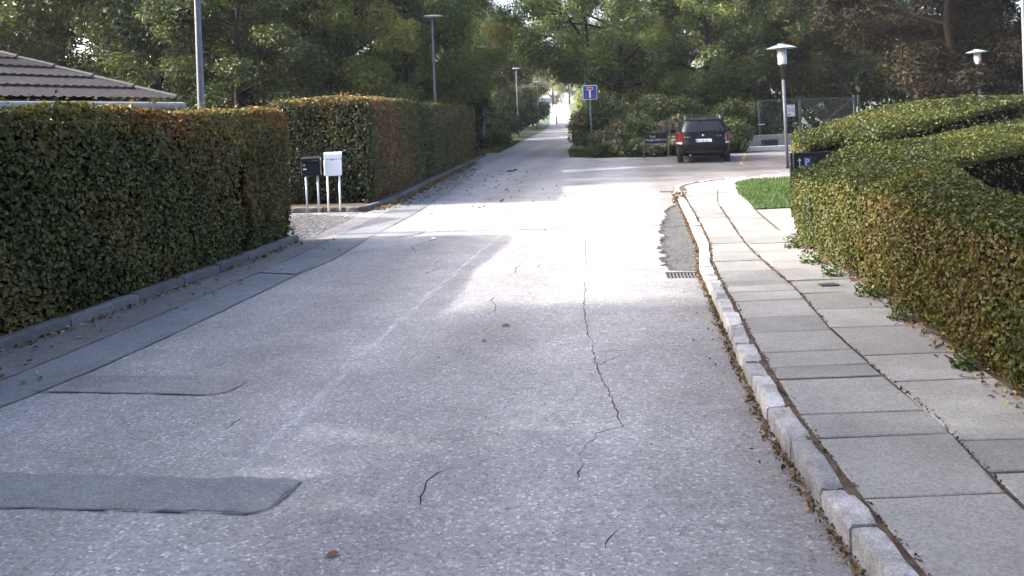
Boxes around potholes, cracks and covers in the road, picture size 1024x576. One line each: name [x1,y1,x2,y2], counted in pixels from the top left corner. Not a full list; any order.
crack [537,229,648,494]
crack [419,466,461,510]
